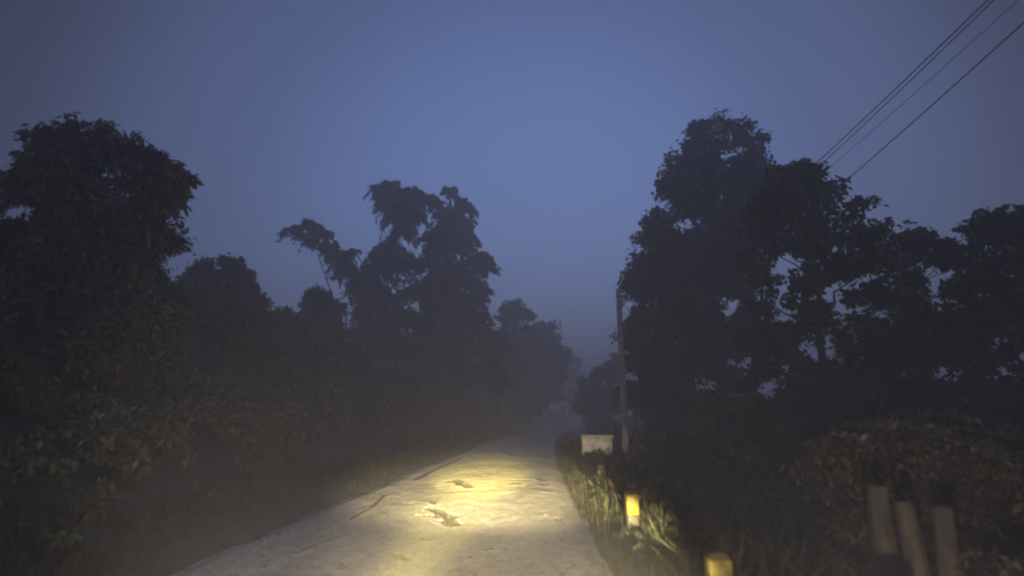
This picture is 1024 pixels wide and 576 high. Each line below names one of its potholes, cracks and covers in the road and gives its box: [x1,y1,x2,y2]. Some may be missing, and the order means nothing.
crack [286,449,559,556]
pothole [407,506,471,528]
